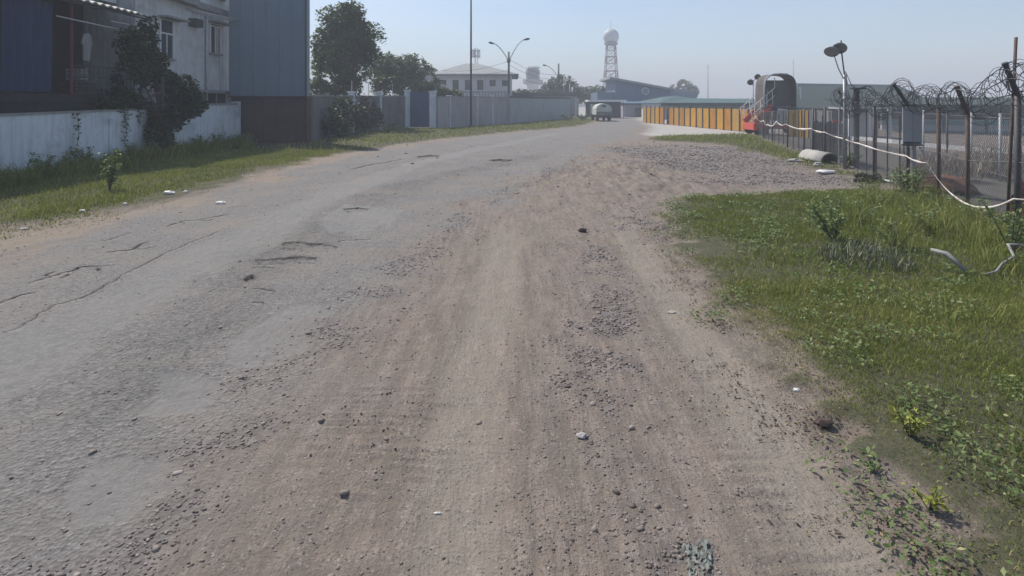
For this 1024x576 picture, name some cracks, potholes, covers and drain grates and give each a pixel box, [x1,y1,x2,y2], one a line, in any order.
pothole [250,255,323,270]
crack [0,206,249,333]
pothole [341,207,373,215]
crack [351,159,408,169]
pothole [277,241,342,255]
